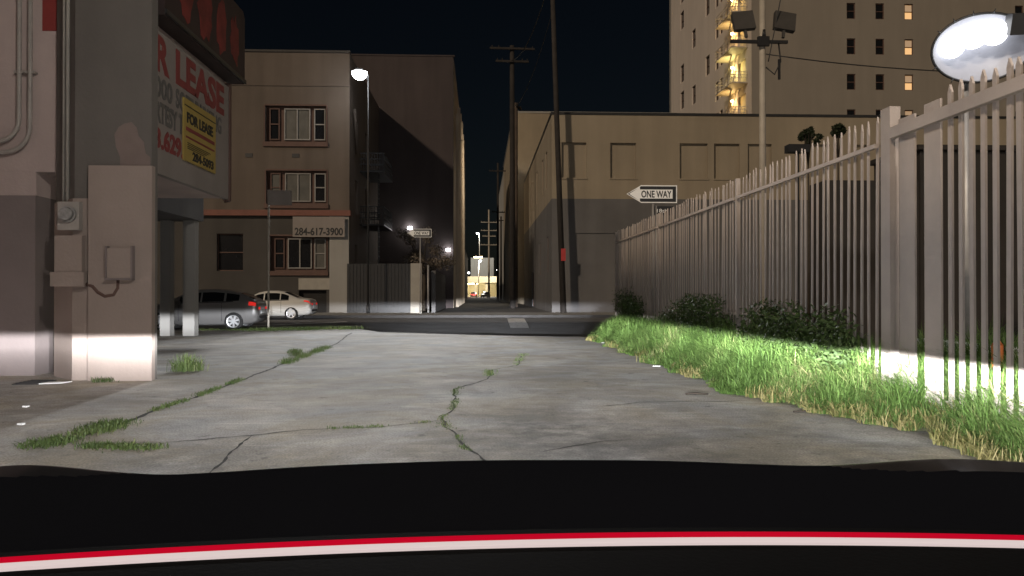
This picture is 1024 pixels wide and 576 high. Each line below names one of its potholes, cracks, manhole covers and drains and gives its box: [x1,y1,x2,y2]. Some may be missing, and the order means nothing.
crack [169,353,524,473]
